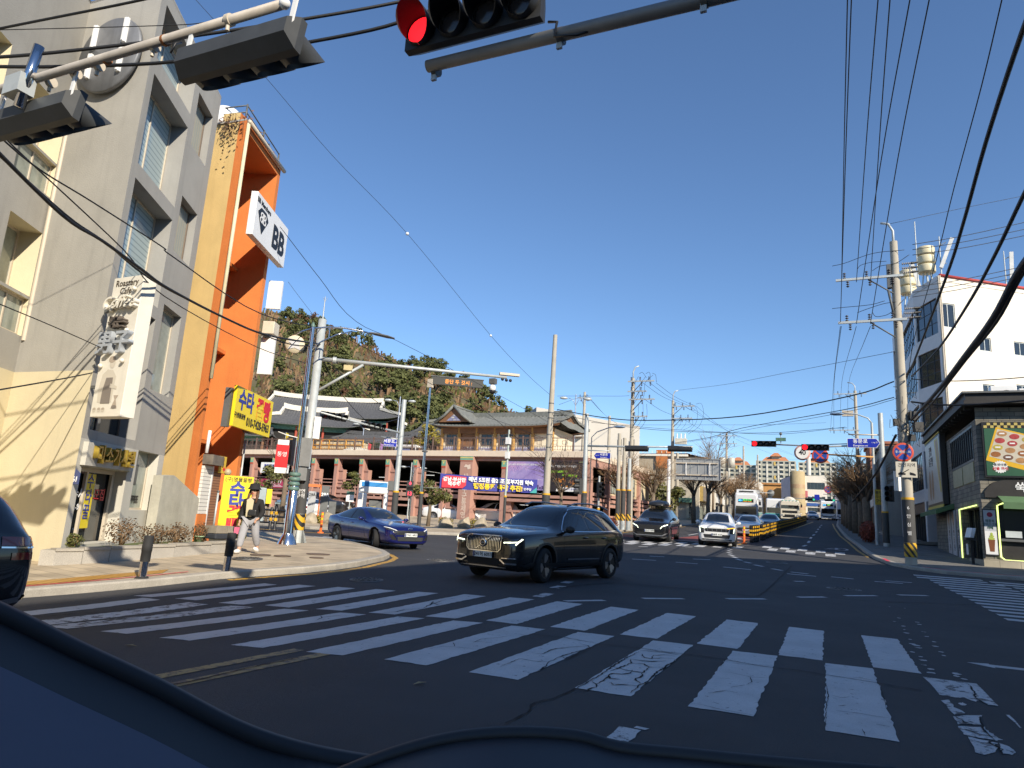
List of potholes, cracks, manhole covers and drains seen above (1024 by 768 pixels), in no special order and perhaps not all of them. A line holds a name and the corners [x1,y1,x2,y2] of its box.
crack [825,677,890,734]
crack [955,684,1004,754]
crack [504,634,918,723]
